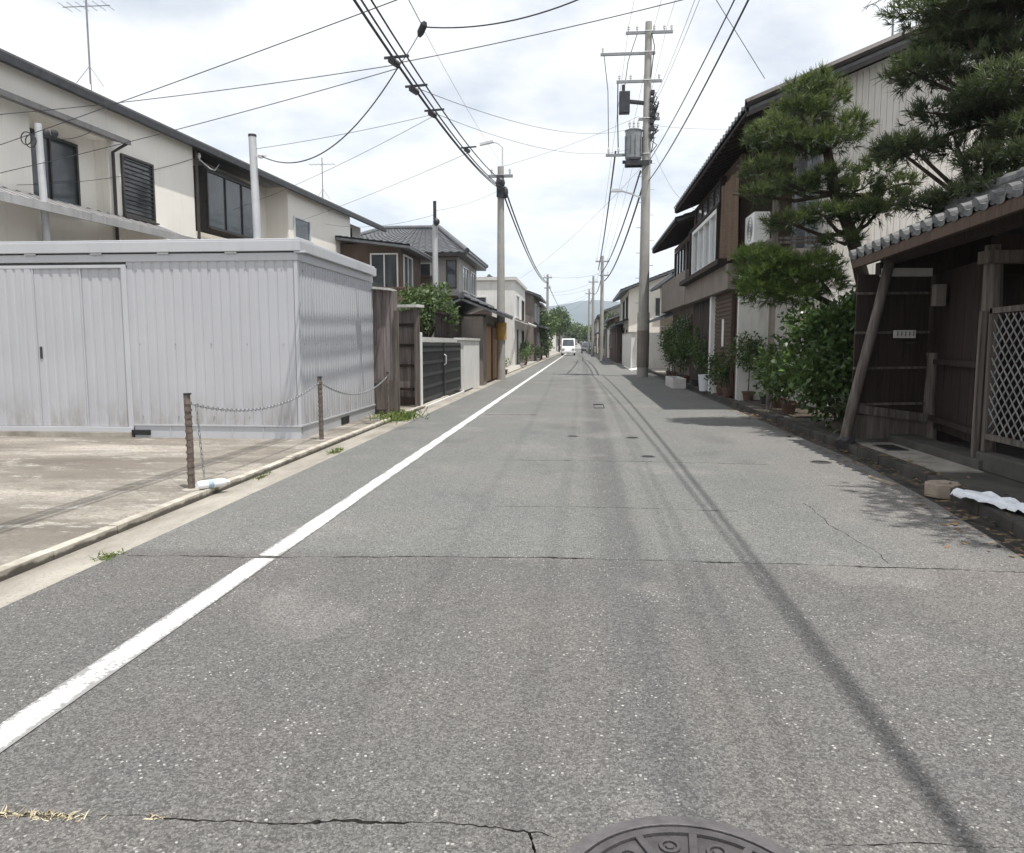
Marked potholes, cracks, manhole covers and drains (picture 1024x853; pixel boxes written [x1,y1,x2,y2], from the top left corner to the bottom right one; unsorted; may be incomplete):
manhole cover [566,816,792,853]
crack [127,503,1024,573]
crack [3,813,554,853]
